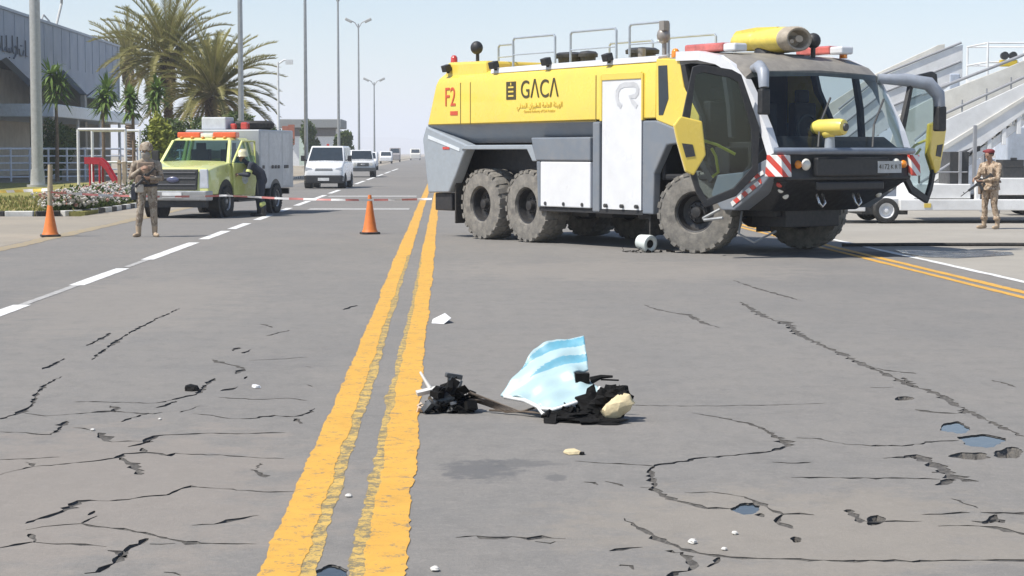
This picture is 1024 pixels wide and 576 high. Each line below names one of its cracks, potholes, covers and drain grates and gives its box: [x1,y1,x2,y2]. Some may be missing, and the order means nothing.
crack [0,310,314,575]
crack [591,405,1024,576]
crack [645,305,719,328]
pothole [957,434,1006,448]
pothole [994,447,1023,458]
pothole [731,503,761,515]
pothole [866,515,886,526]
pothole [940,421,970,434]
pothole [316,565,348,576]
crack [737,281,1021,436]
